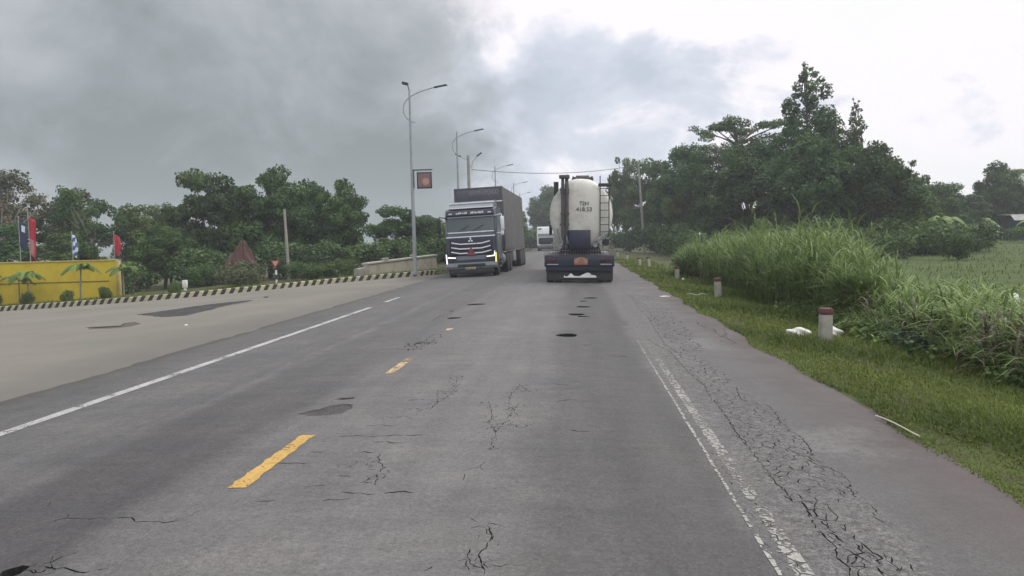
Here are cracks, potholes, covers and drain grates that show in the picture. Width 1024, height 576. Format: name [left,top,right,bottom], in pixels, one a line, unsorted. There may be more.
crack [630,295,738,353]
crack [457,519,511,574]
crack [649,340,913,576]
crack [46,502,203,523]
pothole [299,404,353,416]
crack [397,289,476,351]
crack [308,376,463,501]
crack [463,385,538,480]
crack [16,551,107,576]
